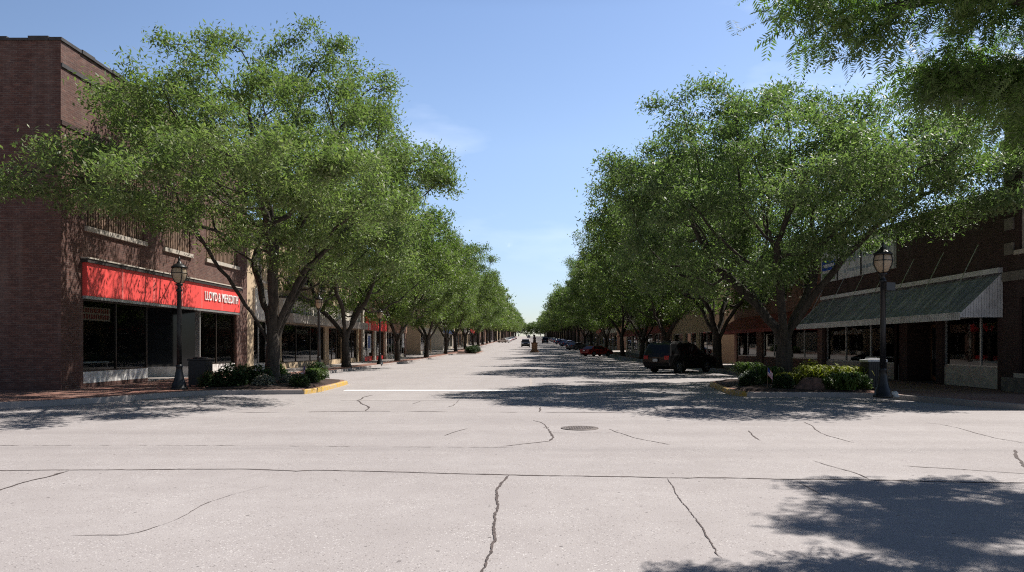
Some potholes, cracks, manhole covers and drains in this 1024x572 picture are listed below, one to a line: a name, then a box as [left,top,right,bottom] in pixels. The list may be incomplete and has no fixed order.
crack [0,423,1024,572]
crack [322,397,613,413]
crack [508,407,554,446]
